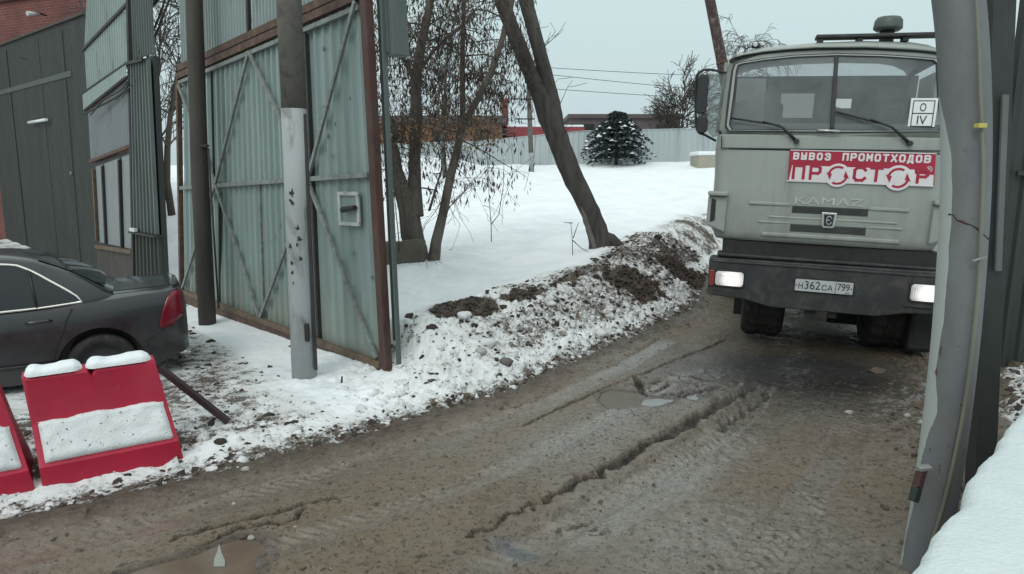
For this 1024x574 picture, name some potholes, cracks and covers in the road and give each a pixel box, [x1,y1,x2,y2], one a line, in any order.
pothole [637,396,679,407]
pothole [112,533,273,574]
crack [415,338,776,558]
crack [170,495,351,546]
pothole [594,388,650,409]
